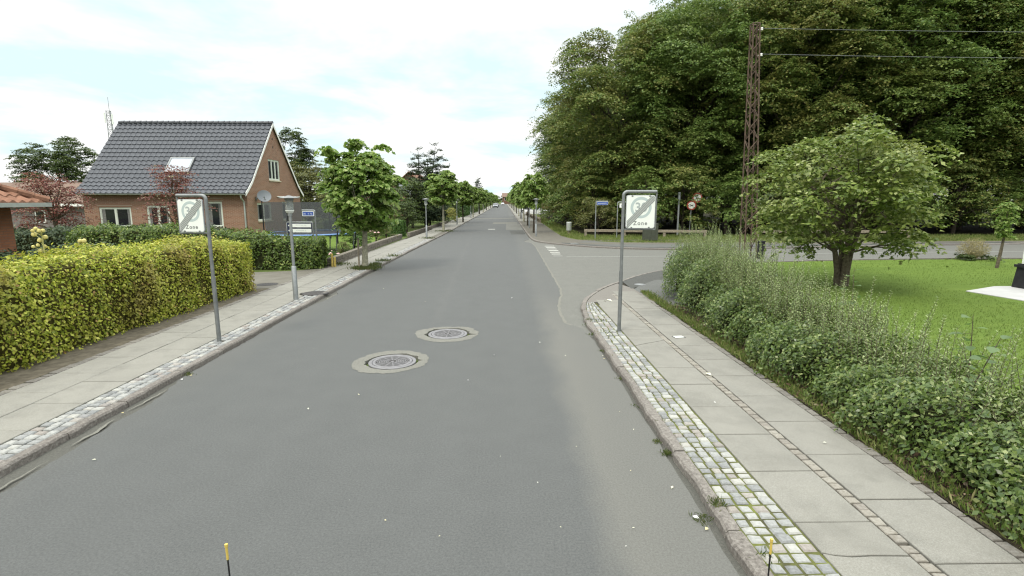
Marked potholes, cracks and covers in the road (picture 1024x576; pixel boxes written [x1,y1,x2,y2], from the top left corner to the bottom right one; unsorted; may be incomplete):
manhole cover [428,329,467,339]
manhole cover [368,355,416,370]
